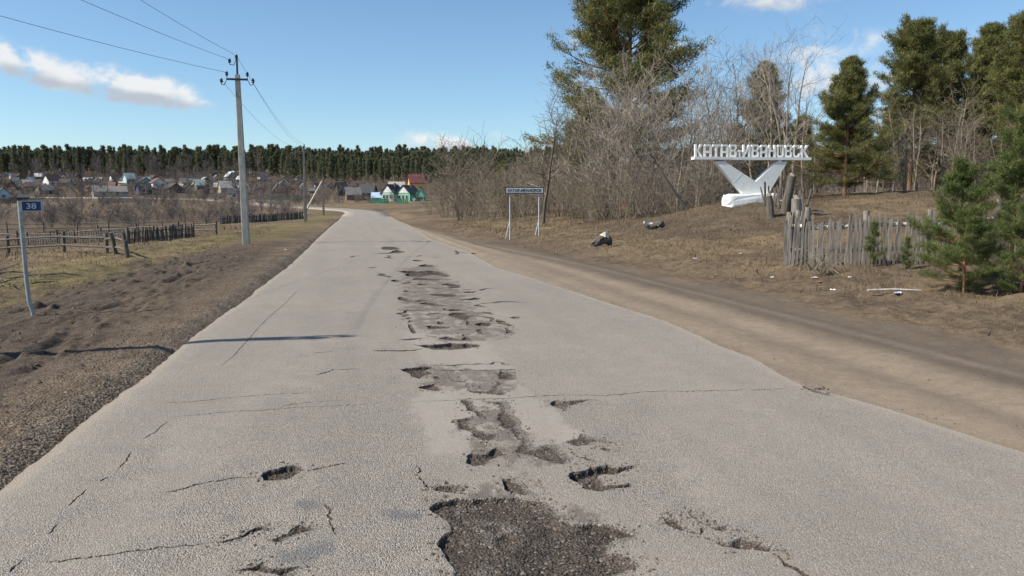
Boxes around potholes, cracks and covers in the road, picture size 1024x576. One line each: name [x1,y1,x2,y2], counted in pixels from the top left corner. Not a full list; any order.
crack [164,463,345,493]
pothole [566,434,617,446]
pothole [490,401,573,465]
pothole [429,496,642,576]
crack [168,392,376,417]
pothole [262,465,305,481]
crack [7,292,296,574]
crack [413,388,782,402]
pothole [460,400,490,420]
pothole [550,399,591,410]
pothole [456,417,501,444]
